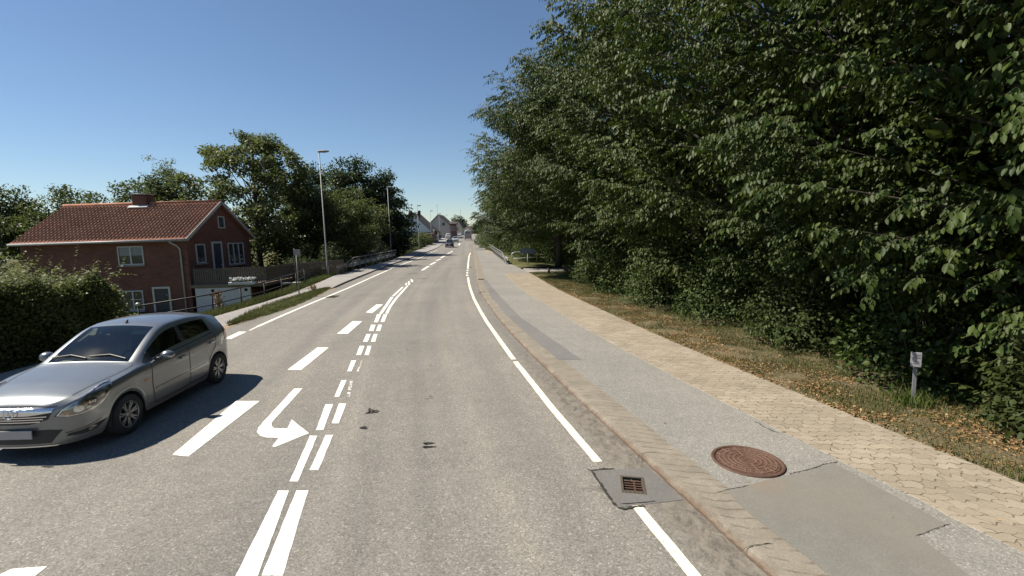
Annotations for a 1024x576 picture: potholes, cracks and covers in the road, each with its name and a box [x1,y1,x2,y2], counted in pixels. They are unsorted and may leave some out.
manhole cover [711,445,786,478]
drain grate [620,475,647,495]
